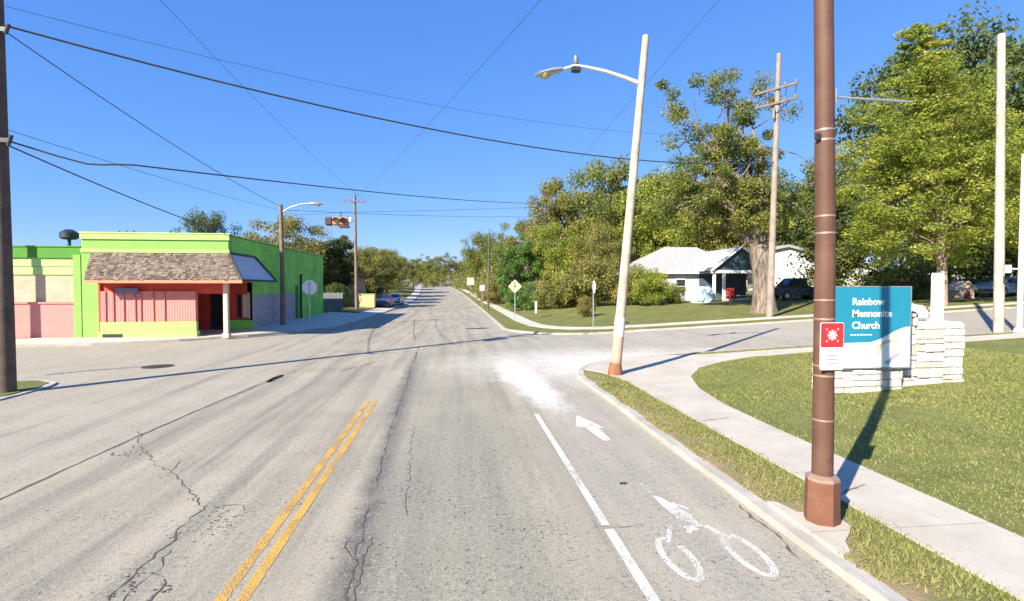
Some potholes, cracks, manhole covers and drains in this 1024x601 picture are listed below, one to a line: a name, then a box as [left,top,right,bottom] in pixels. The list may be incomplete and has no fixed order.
crack [99,431,262,601]
crack [340,425,417,601]
